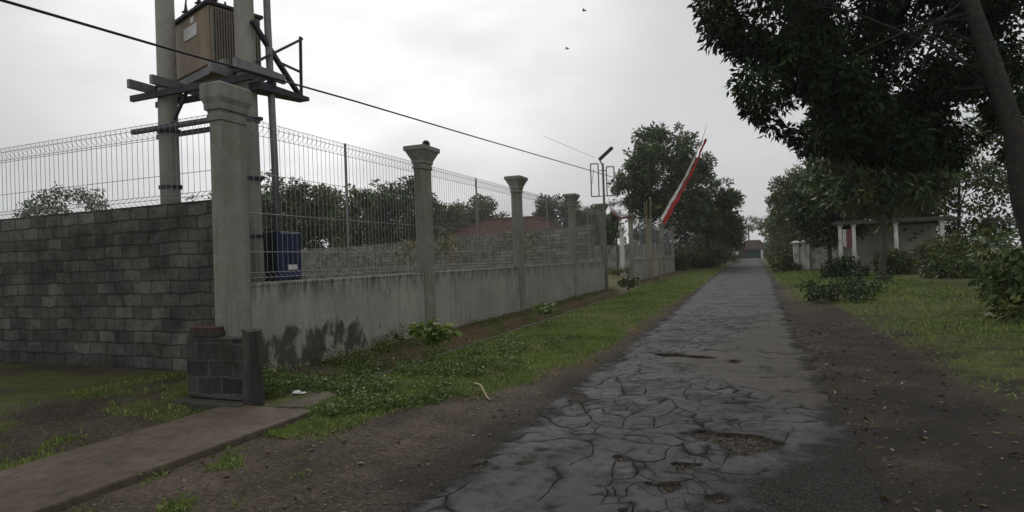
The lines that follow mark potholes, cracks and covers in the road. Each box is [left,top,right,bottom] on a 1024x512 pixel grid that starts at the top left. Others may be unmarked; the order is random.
crack [422,266,820,512]
pothole [644,481,683,493]
pothole [704,494,729,504]
pothole [692,429,786,456]
pothole [671,462,703,470]
